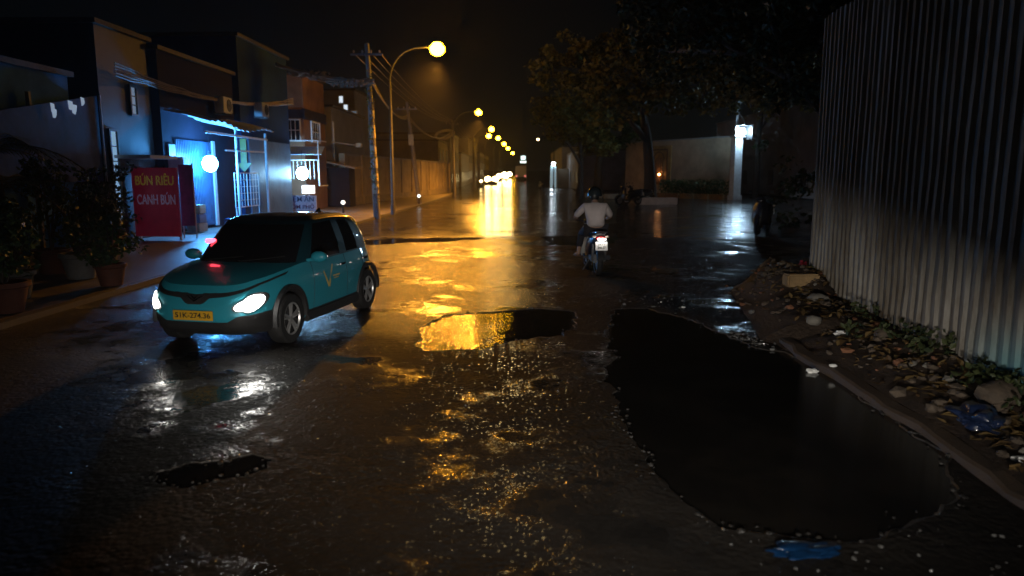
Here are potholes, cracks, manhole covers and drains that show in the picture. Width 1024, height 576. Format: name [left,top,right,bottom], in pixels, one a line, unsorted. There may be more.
pothole [414,308,578,351]
pothole [602,308,960,543]
pothole [154,453,273,488]
